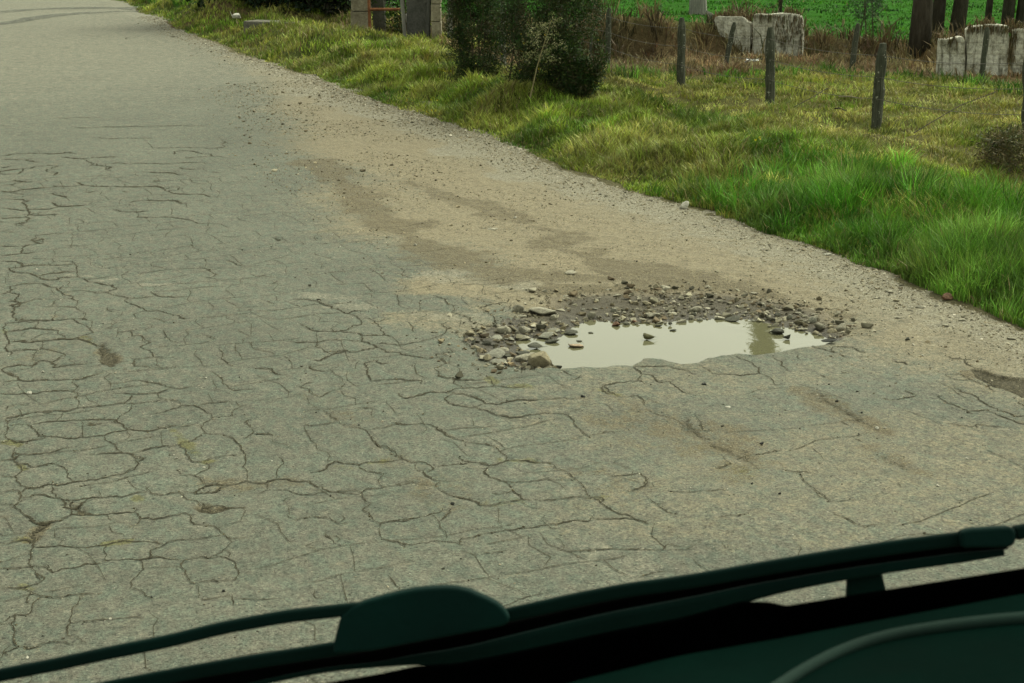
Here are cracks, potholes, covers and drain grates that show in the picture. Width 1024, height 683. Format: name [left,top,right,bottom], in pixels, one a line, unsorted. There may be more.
crack [11,609,30,648]
pothole [463,290,850,370]
crack [136,444,210,462]
crack [483,466,536,500]
crack [33,540,151,548]
crack [32,476,108,489]
crack [254,478,316,487]
crack [31,526,47,545]
crack [63,500,86,509]
crack [32,491,146,501]
crack [58,394,133,411]
